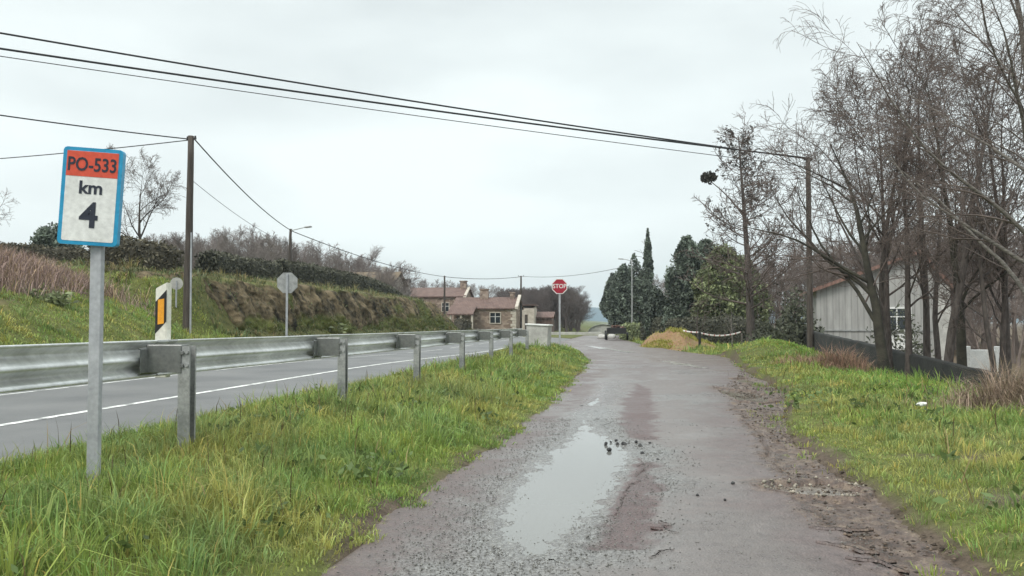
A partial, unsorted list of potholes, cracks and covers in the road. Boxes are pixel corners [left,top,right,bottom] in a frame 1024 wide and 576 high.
pothole [481,409,648,560]
